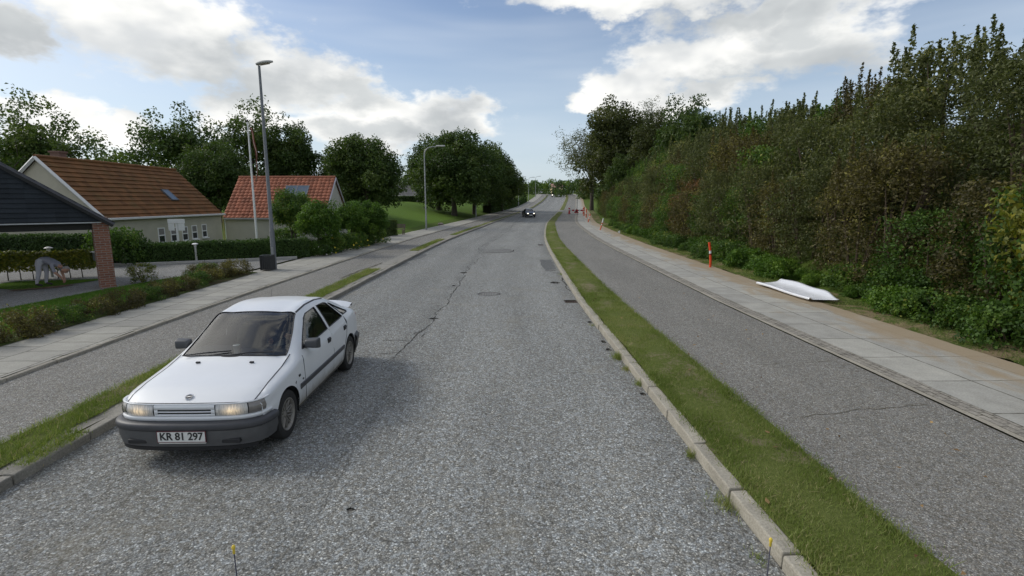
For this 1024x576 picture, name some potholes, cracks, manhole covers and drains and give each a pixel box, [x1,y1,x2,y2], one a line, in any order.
crack [382,216,541,363]
crack [760,361,913,418]
